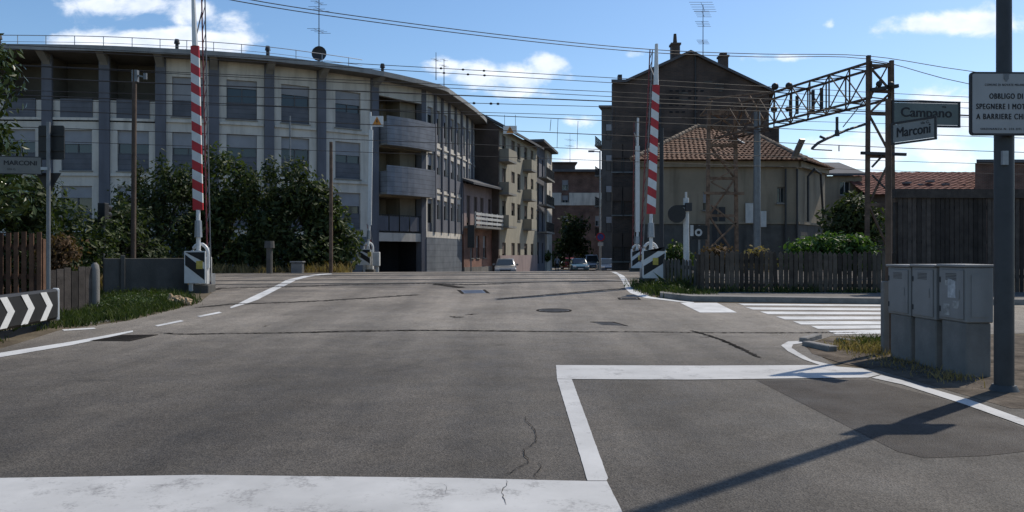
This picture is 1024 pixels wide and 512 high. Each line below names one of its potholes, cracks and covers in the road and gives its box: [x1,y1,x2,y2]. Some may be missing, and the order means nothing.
crack [492,416,541,503]
